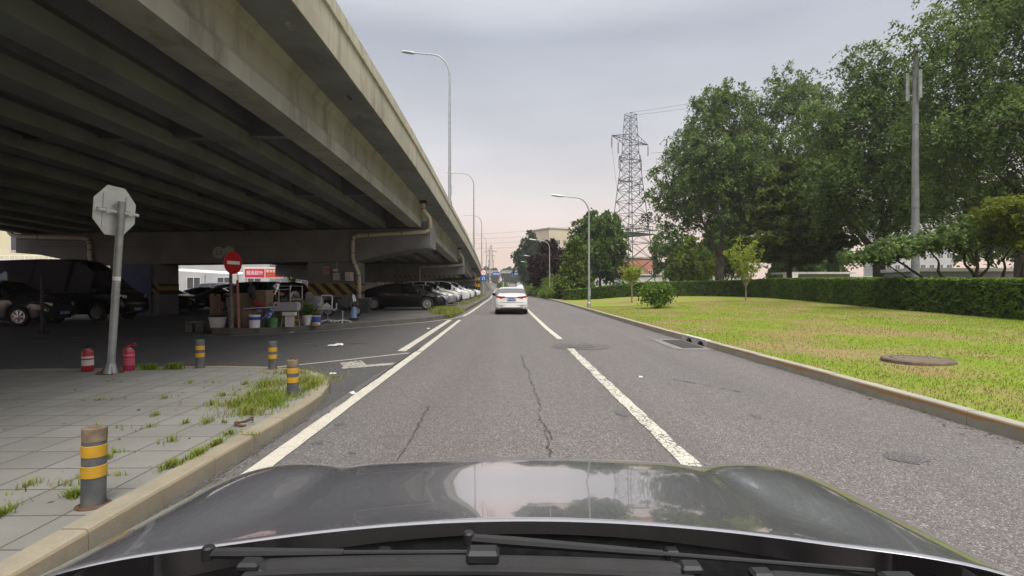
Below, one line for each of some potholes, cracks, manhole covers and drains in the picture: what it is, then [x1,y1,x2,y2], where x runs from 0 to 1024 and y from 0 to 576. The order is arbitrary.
drain grate [650,339,715,350]
drain grate [682,334,712,347]
crack [521,356,553,457]
manhole cover [879,354,958,366]
